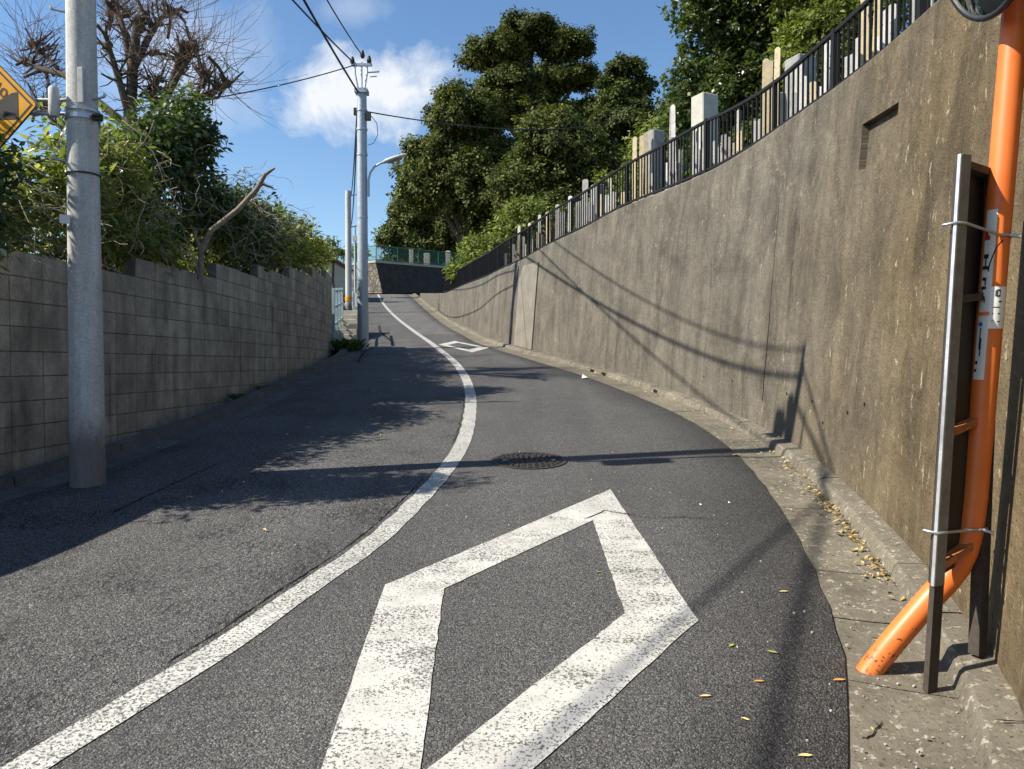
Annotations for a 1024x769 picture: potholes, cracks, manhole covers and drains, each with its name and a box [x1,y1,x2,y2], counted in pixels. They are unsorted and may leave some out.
manhole cover [492,452,567,470]
